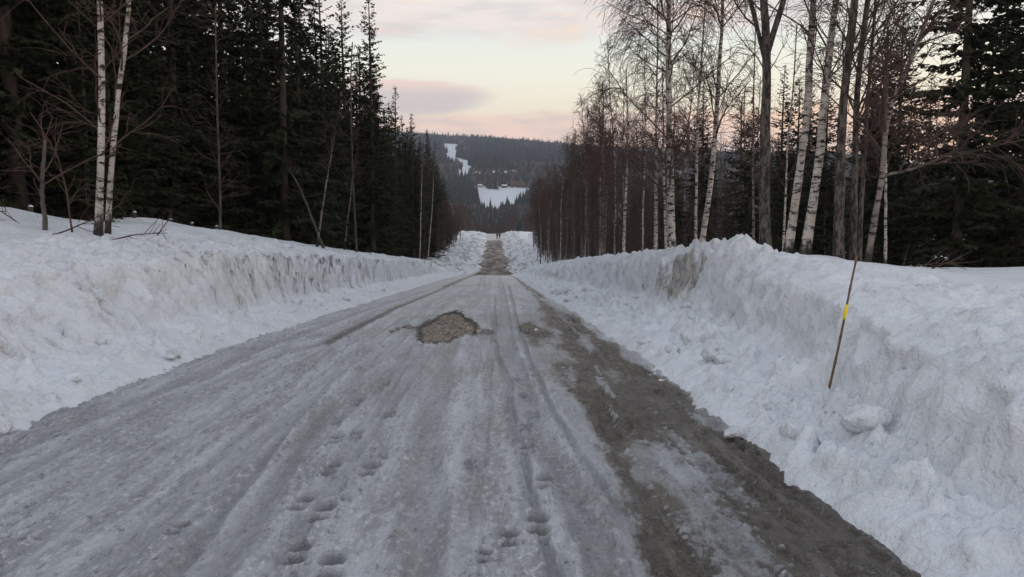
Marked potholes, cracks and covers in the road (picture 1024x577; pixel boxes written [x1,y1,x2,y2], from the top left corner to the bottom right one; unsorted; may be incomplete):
pothole [418,311,478,343]
